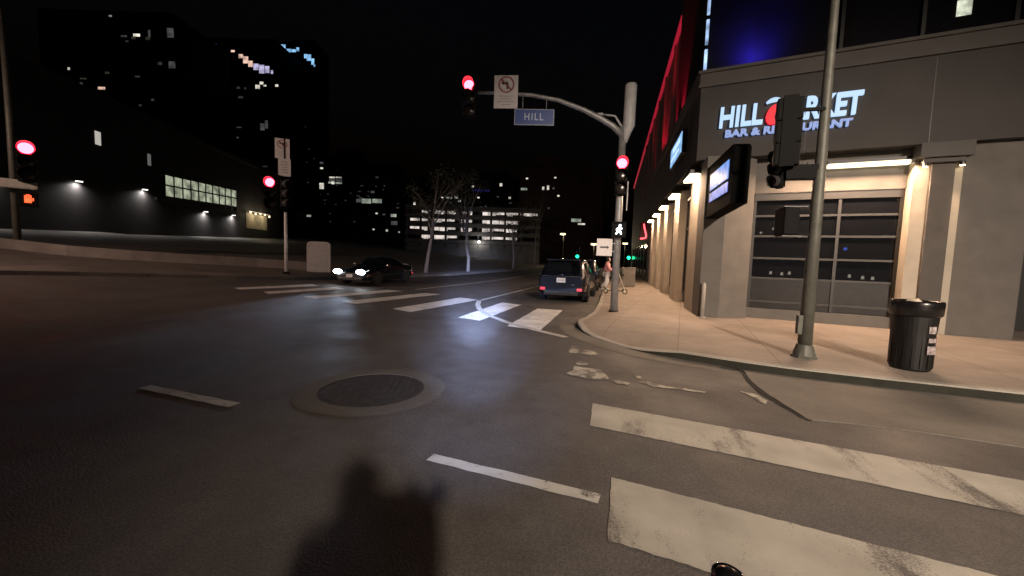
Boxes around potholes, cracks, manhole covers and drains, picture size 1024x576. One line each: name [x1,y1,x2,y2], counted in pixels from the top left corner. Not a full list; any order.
manhole cover [291,369,445,417]
